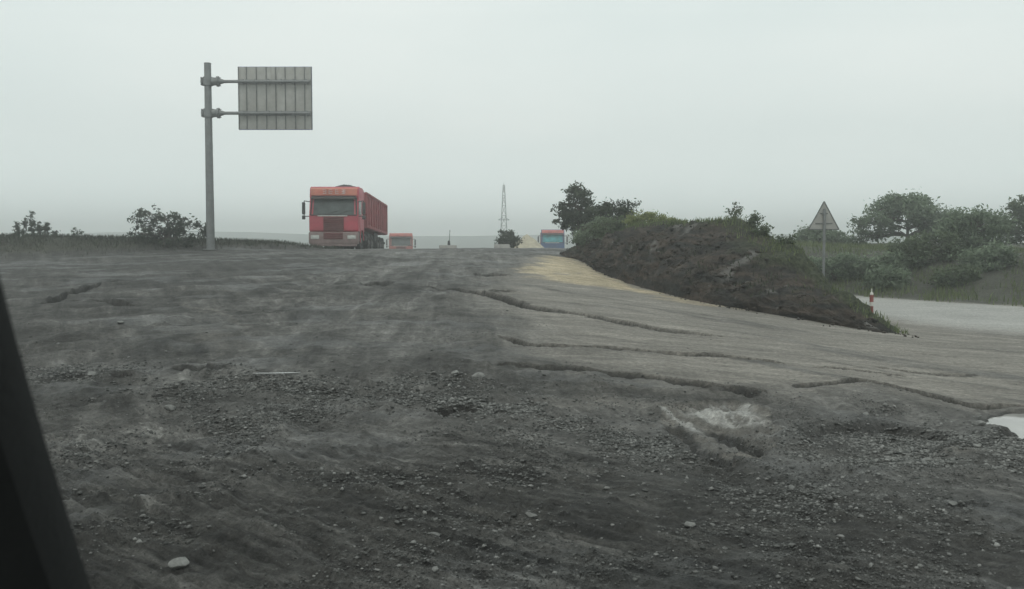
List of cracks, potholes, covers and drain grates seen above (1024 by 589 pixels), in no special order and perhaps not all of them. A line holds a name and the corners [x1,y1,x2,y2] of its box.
crack [41,280,134,307]
crack [429,287,781,395]
pothole [658,398,784,470]
pothole [975,409,1024,437]
crack [793,366,1024,410]
